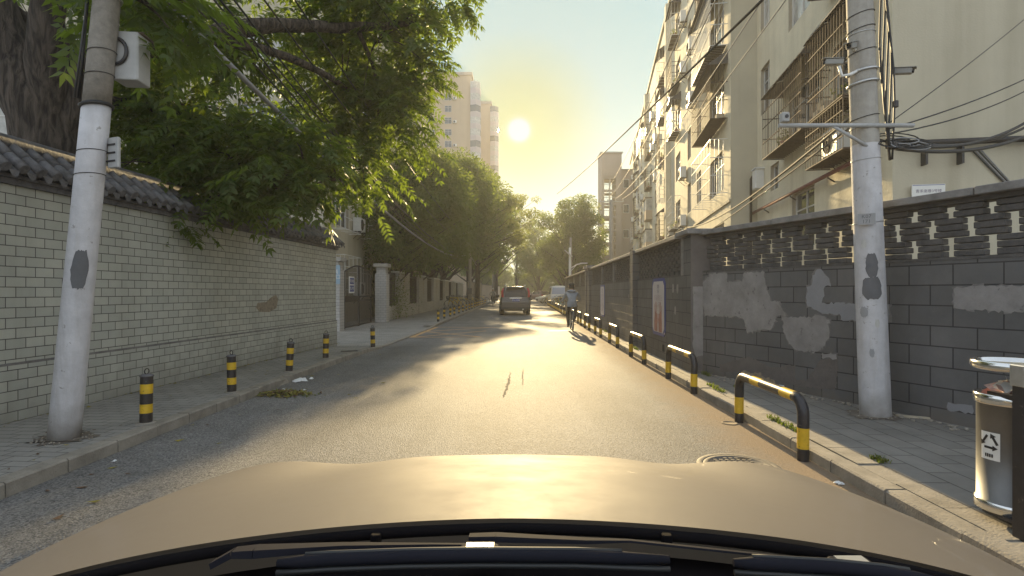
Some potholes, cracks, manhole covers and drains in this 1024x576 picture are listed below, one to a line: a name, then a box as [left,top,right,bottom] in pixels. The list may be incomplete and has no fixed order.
crack [503,368,524,397]
manhole cover [697,453,782,469]
